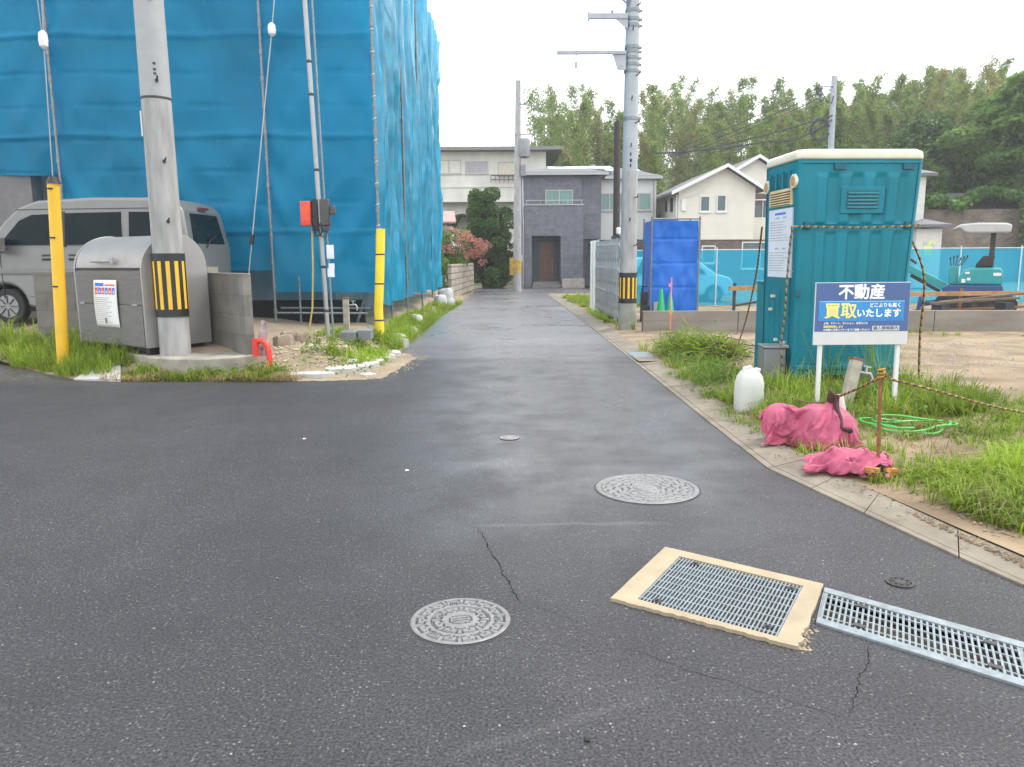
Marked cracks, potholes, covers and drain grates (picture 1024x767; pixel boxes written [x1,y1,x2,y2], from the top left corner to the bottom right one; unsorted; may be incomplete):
crack [478,529,577,622]
manhole cover [594,474,701,505]
manhole cover [885,576,916,589]
crack [628,647,871,719]
drain grate [610,547,824,653]
drain grate [815,587,1024,689]
manhole cover [409,598,512,647]
